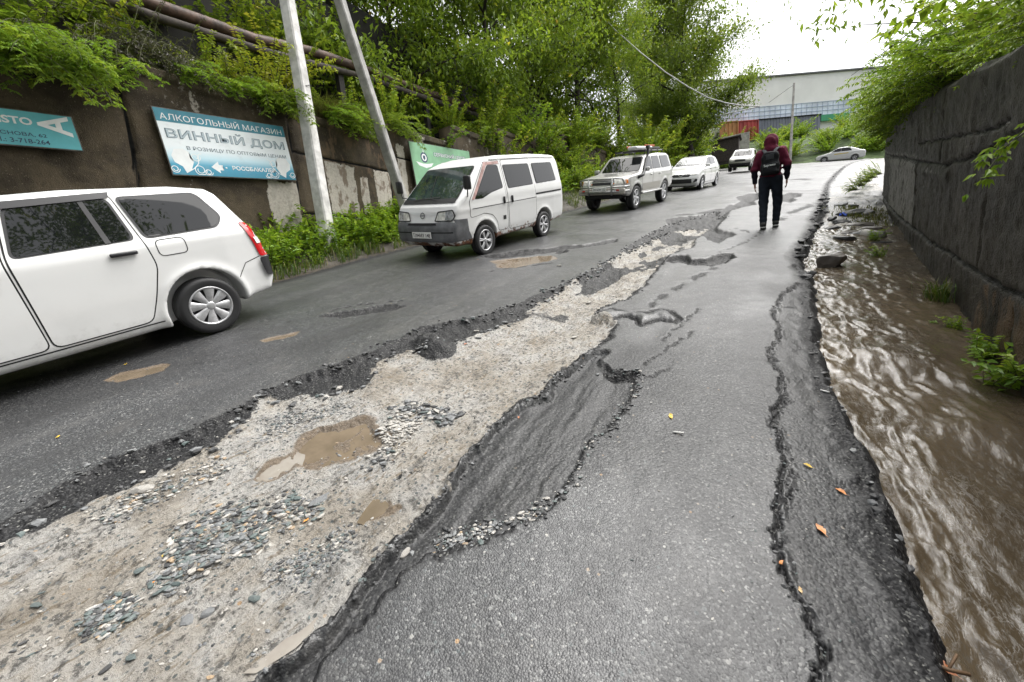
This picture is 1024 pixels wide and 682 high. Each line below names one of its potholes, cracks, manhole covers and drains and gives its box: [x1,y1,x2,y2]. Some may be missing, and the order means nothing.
pothole [702,227,738,244]
crack [0,159,868,682]
pothole [0,213,722,682]
